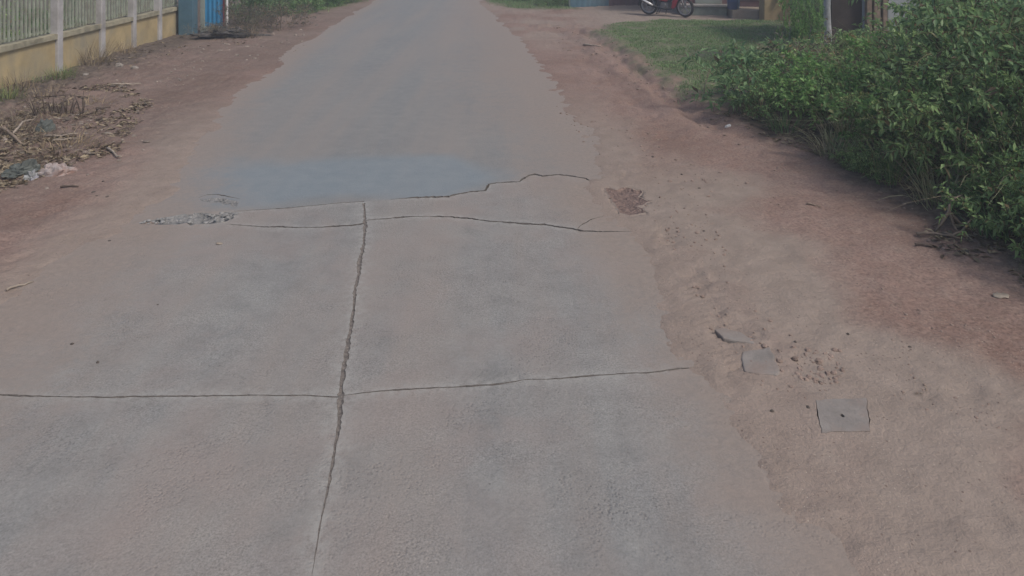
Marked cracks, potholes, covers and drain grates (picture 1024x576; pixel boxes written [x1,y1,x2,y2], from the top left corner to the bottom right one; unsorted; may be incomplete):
manhole cover [799,390,886,442]
pothole [134,212,238,226]
pothole [201,198,239,208]
crack [231,173,625,232]
